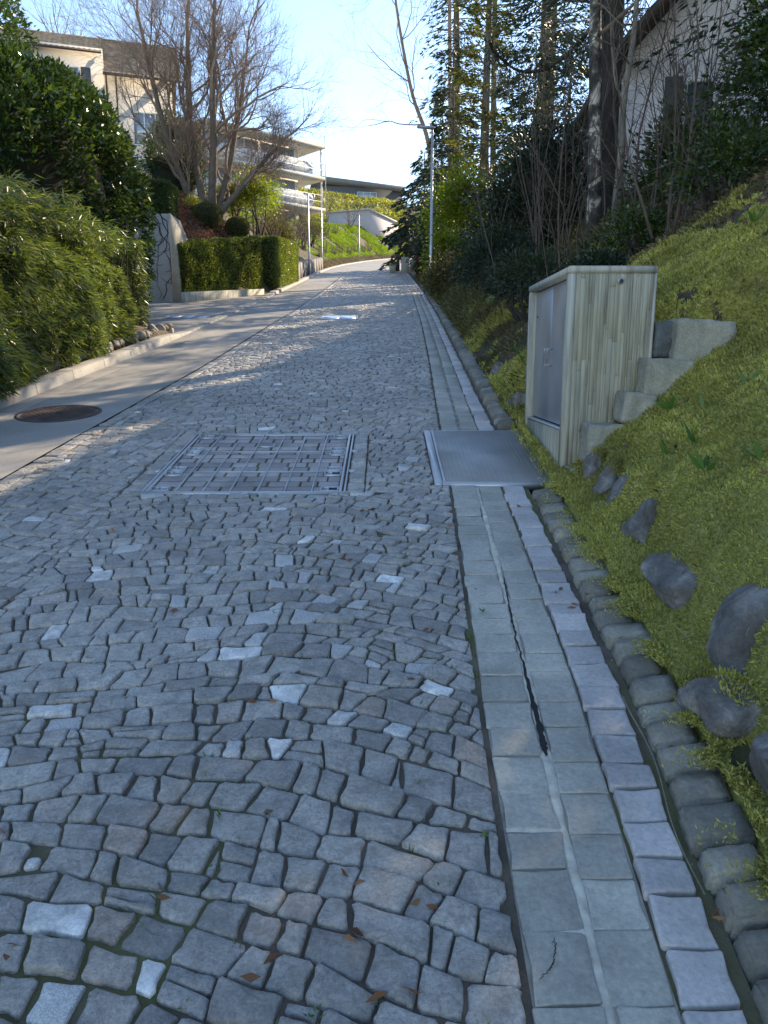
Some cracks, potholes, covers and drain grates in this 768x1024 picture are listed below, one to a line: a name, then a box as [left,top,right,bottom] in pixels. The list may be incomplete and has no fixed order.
manhole cover [424,430,551,490]
manhole cover [14,405,102,423]
crack [504,578,548,756]
crack [540,938,557,979]
